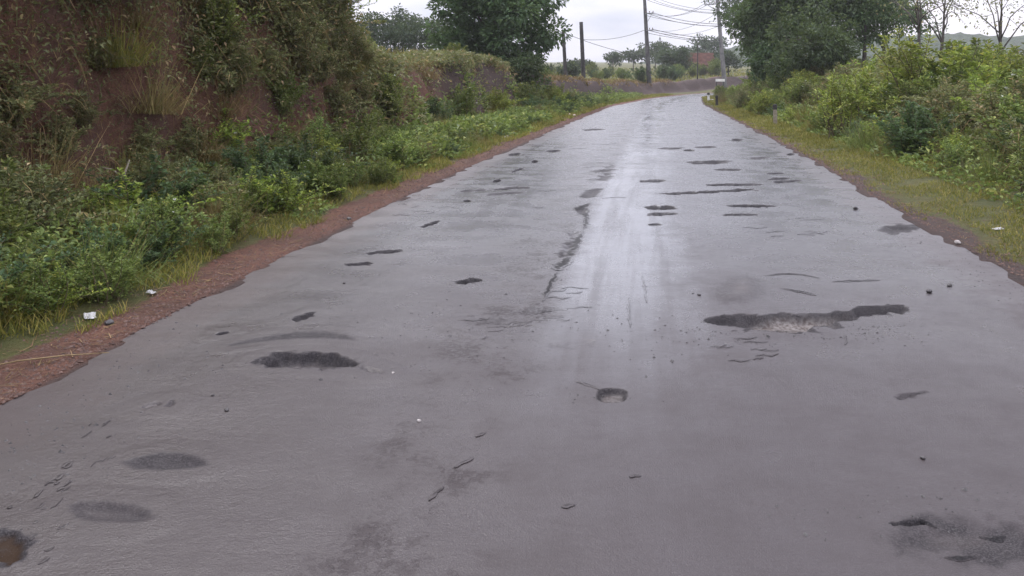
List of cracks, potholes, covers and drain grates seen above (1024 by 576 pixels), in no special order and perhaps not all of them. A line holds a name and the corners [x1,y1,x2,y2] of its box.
pothole [710,202,792,211]
pothole [676,300,928,339]
pothole [223,345,380,378]
pothole [348,246,418,259]
crack [717,330,779,362]
pothole [688,181,778,192]
pothole [640,188,771,197]
